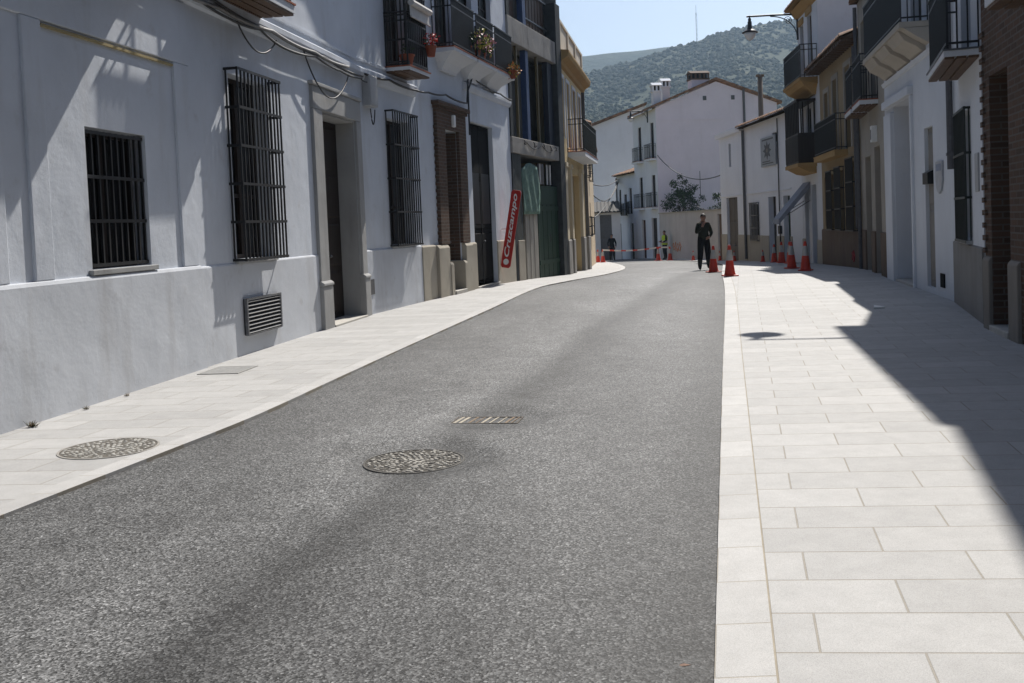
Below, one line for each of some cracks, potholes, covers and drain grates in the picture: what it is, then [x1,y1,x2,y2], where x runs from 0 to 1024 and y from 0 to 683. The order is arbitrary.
utility cover [197,365,258,375]
manhole cover [363,449,465,474]
drain grate [451,416,524,424]
manhole cover [56,437,160,460]
